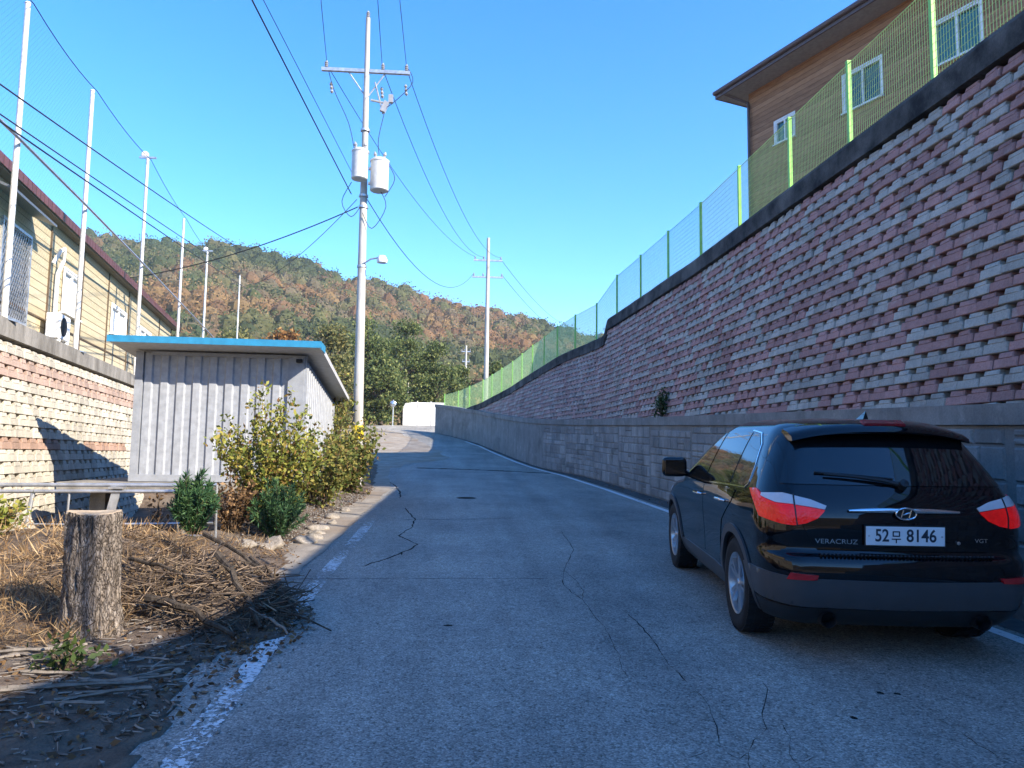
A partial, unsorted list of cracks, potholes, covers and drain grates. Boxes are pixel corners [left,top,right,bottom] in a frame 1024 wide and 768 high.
crack [624,611,814,768]
crack [561,531,627,676]
crack [362,482,544,579]
